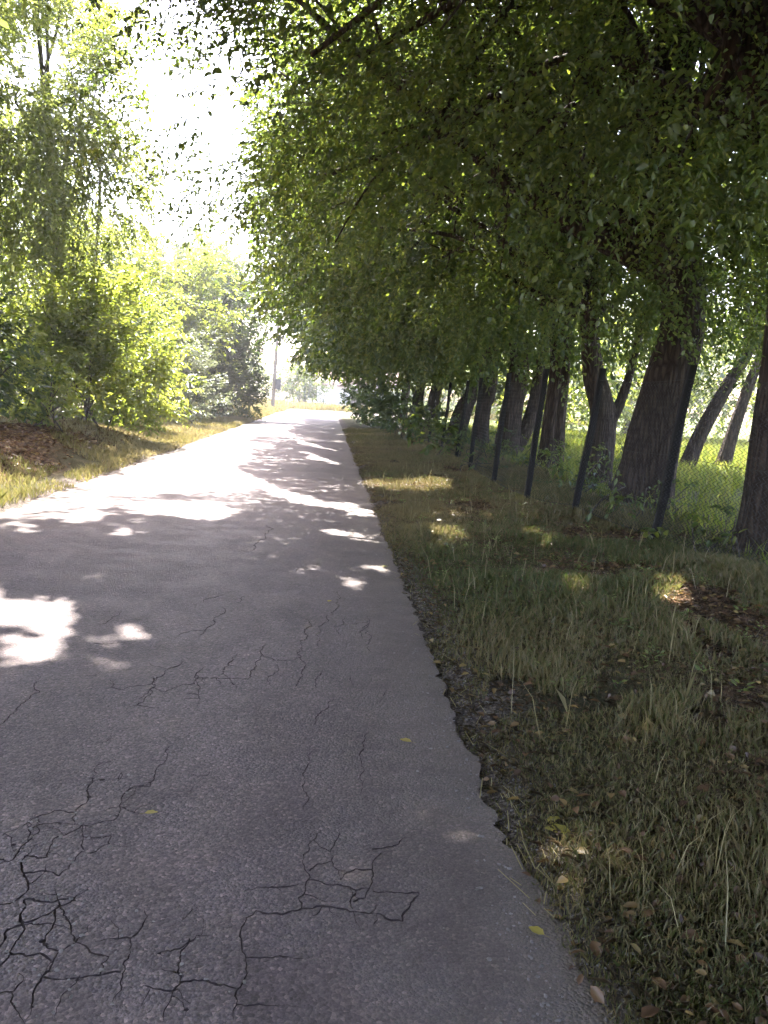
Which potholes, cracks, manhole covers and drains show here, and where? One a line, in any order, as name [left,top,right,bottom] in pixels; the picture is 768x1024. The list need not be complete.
crack [110,592,379,724]
crack [355,733,368,794]
crack [0,747,420,1024]
